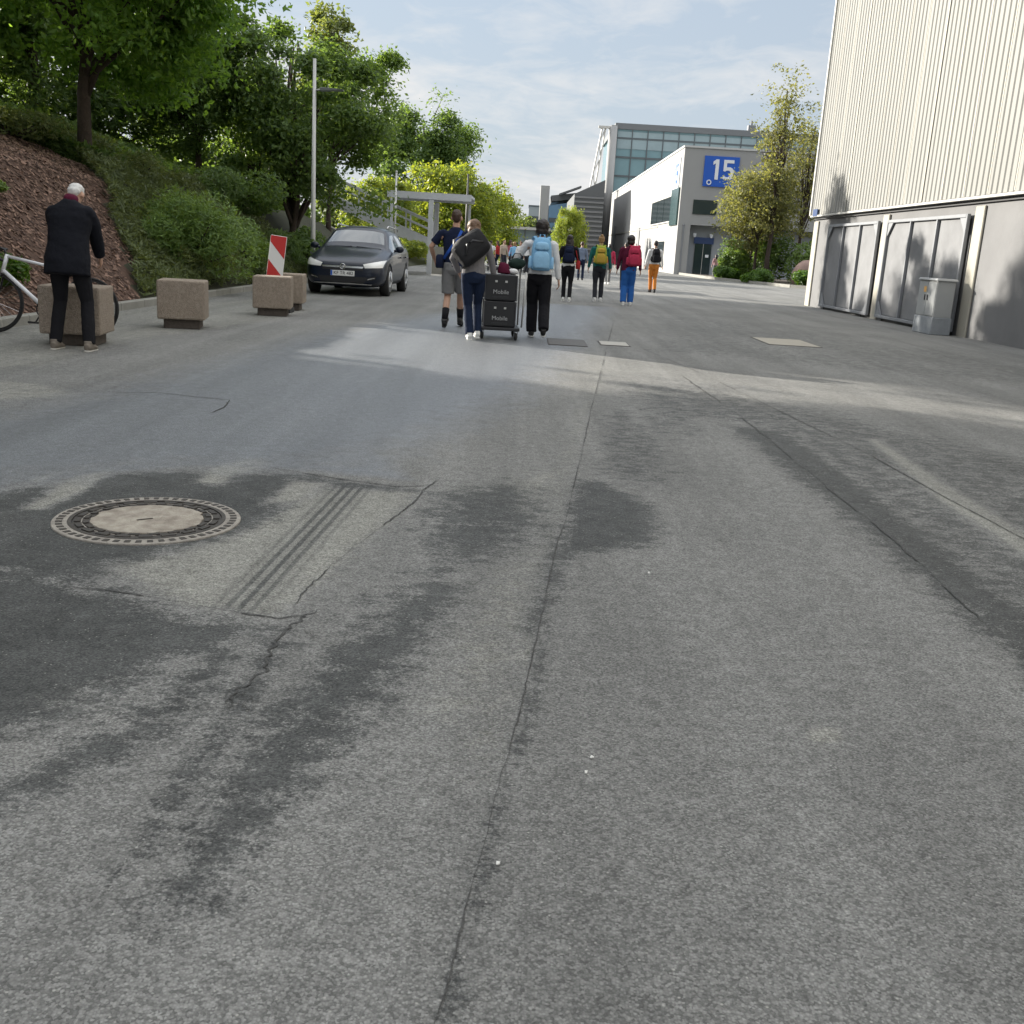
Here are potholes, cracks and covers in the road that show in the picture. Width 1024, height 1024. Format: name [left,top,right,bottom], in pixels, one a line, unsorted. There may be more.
manhole cover [50,497,241,546]
manhole cover [547,338,588,347]
crack [65,468,438,718]
manhole cover [751,337,823,348]
